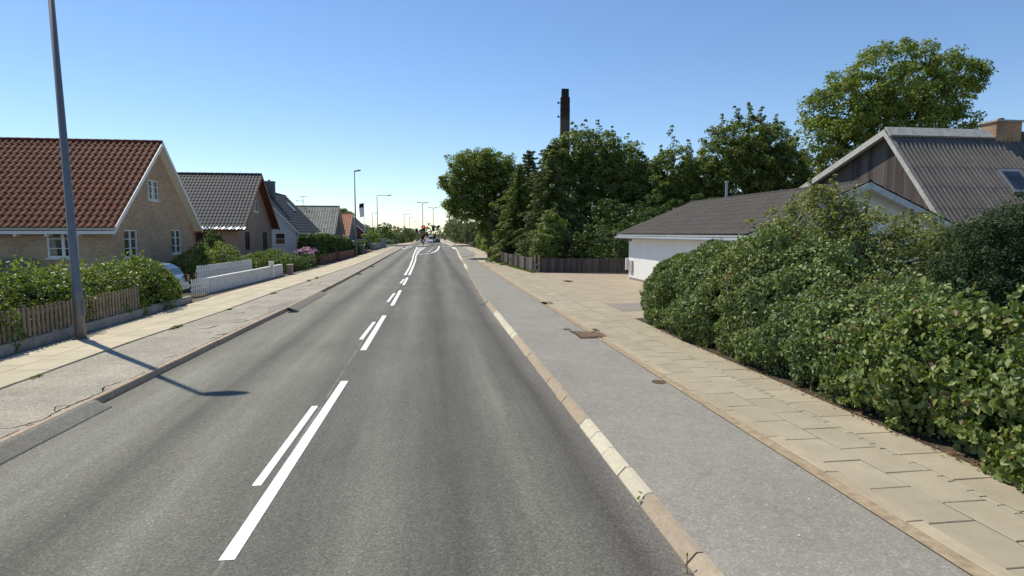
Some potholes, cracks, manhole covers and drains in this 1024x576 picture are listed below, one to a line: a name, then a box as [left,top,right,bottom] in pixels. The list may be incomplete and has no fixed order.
crack [184,303,262,354]
manhole cover [570,329,611,338]
